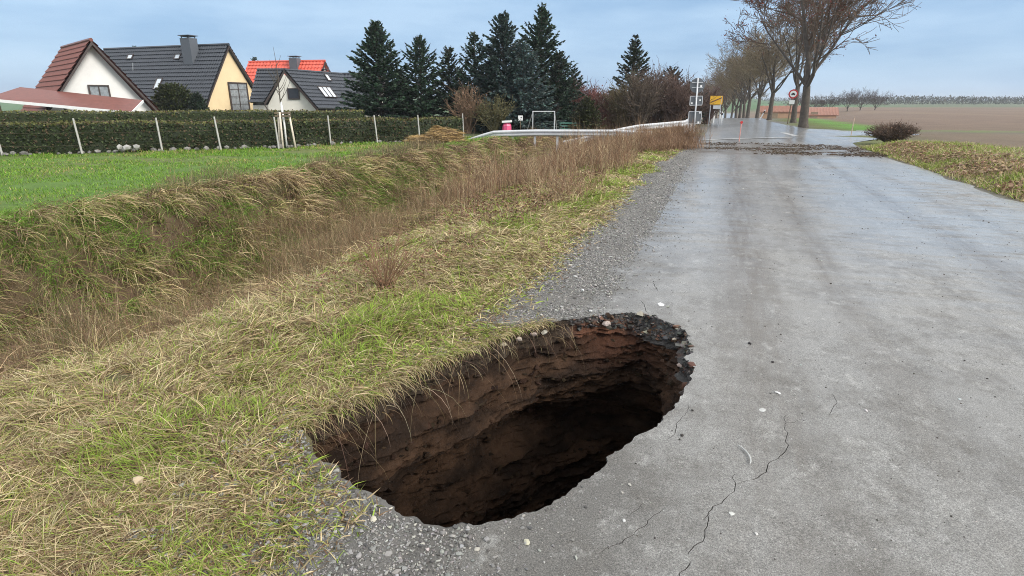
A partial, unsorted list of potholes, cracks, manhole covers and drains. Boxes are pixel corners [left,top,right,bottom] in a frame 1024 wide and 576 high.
crack [679,416,798,576]
crack [602,502,661,552]
